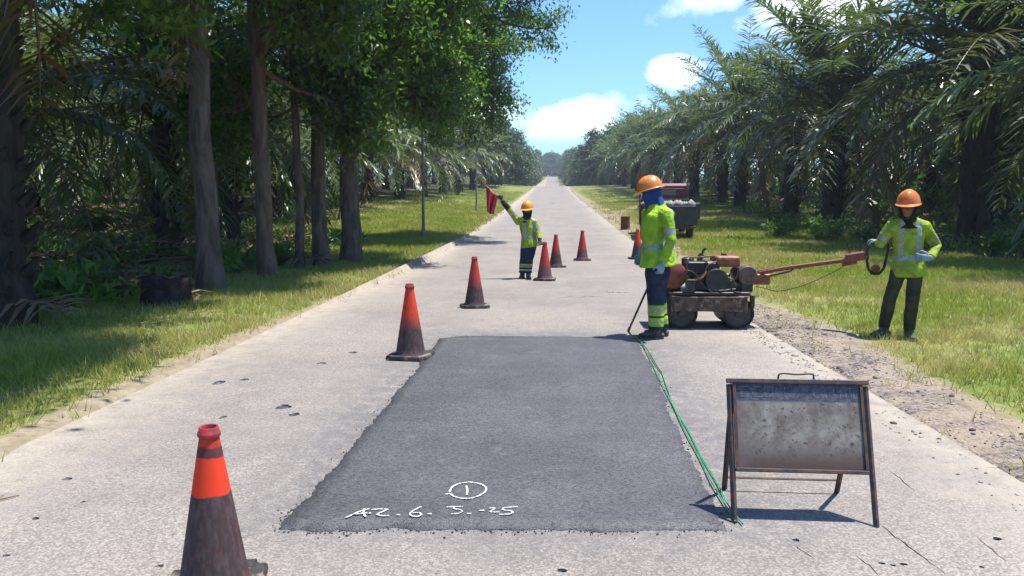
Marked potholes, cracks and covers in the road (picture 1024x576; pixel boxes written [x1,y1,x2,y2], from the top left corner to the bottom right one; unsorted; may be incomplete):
crack [882,526,944,573]
